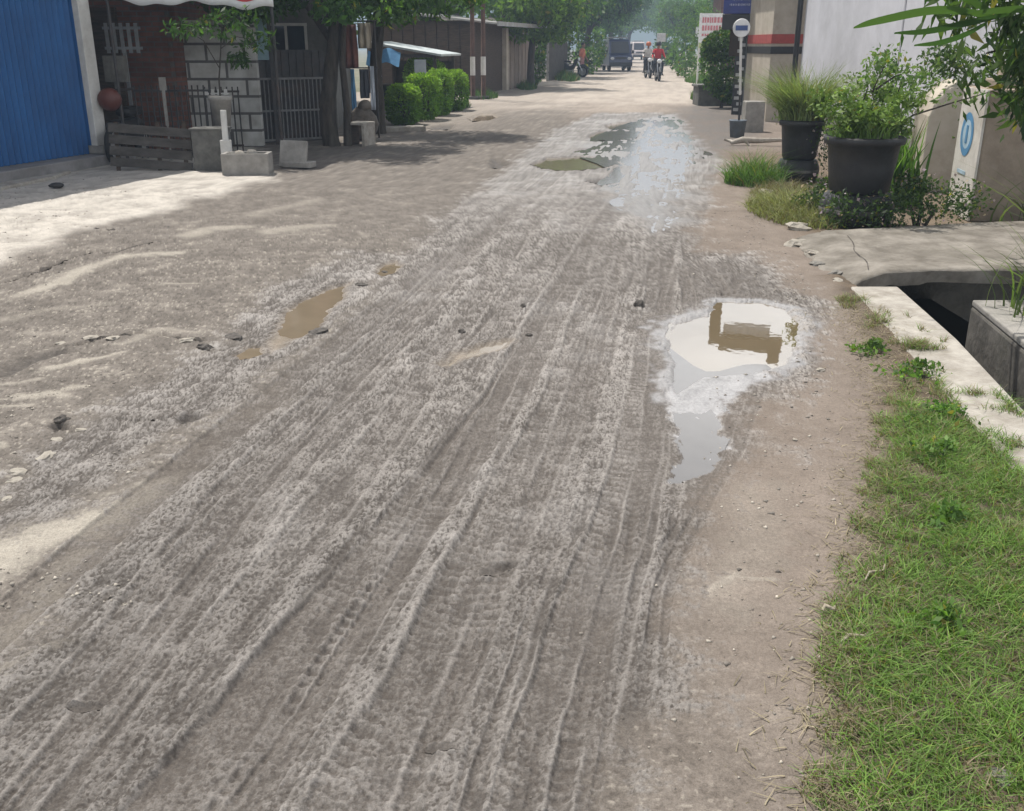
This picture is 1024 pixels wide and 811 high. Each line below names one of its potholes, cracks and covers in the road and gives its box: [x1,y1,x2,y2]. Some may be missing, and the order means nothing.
pothole [257,278,359,357]
pothole [228,344,267,361]
pothole [529,156,621,171]
pothole [660,299,811,396]
